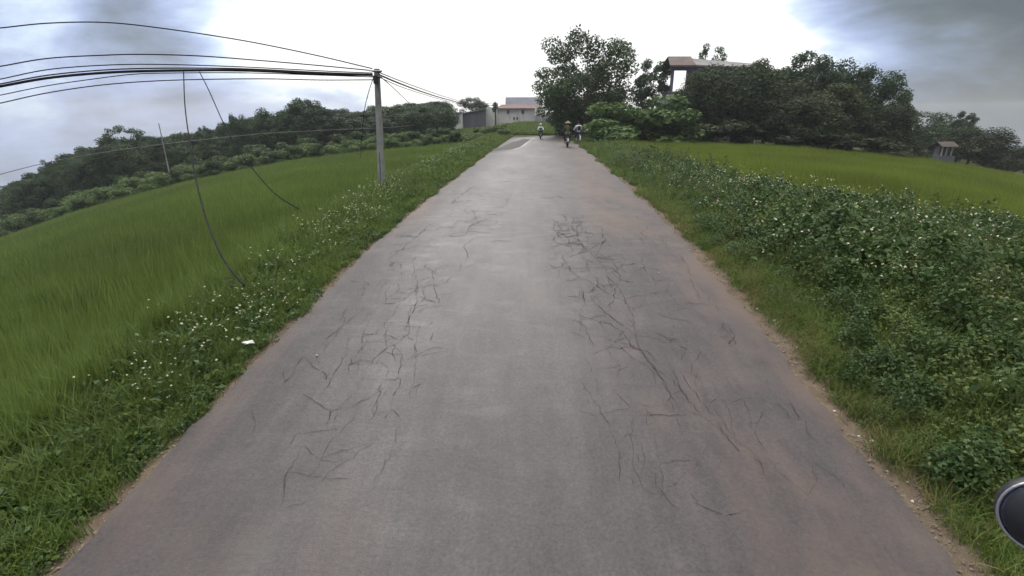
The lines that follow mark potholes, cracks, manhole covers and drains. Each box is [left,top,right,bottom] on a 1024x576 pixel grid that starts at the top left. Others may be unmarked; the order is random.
crack [246,181,844,515]
